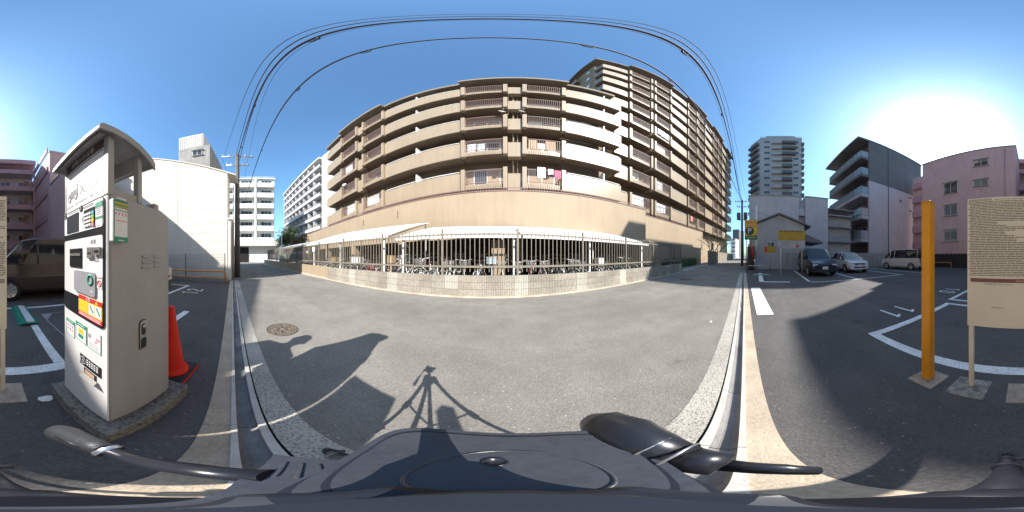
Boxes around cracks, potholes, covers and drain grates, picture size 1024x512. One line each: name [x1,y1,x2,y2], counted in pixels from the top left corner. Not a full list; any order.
manhole cover [266,323,298,336]
